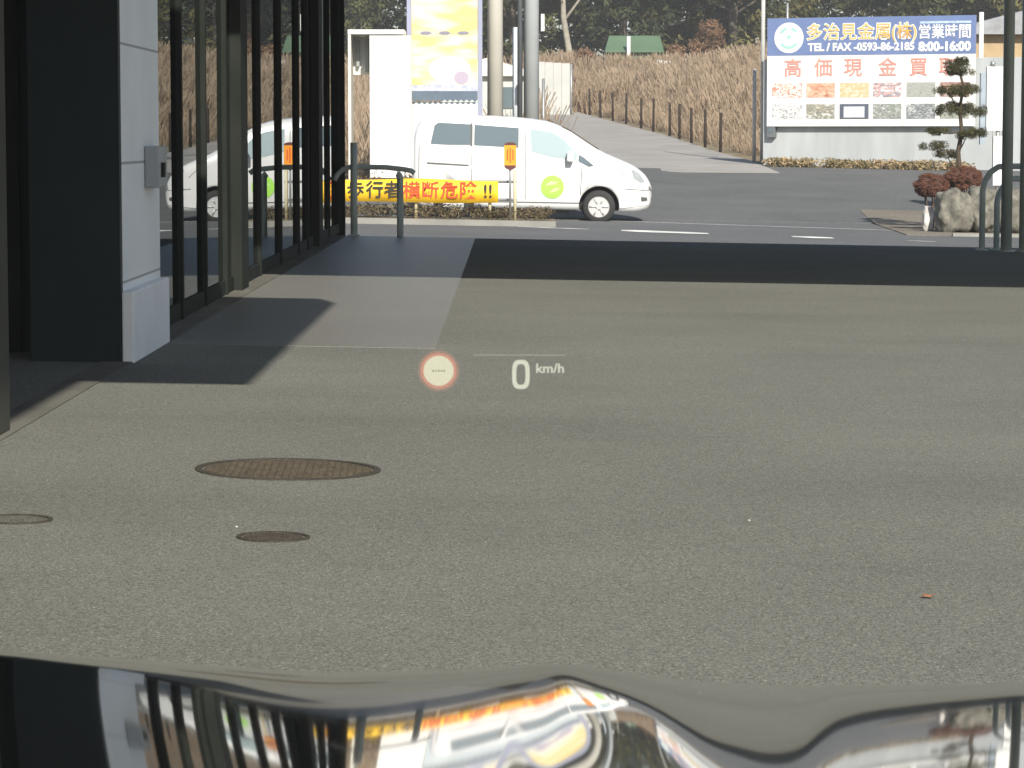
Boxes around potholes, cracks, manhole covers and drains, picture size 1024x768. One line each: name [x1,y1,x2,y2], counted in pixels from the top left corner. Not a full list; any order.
manhole cover [0,514,53,525]
manhole cover [195,458,381,481]
manhole cover [236,531,310,543]
